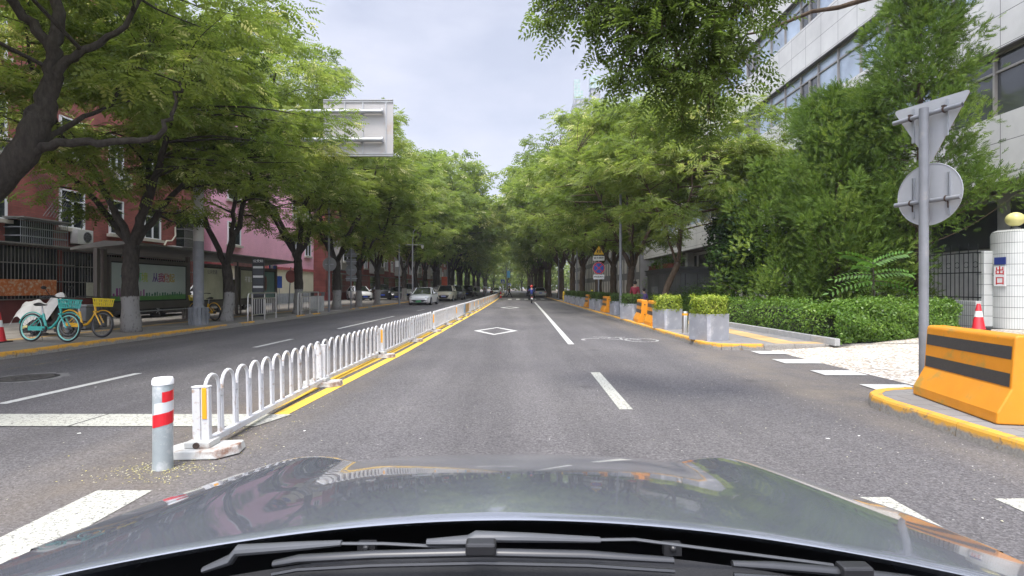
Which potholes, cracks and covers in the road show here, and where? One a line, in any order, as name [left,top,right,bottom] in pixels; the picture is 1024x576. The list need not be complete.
manhole cover [0,372,70,383]
